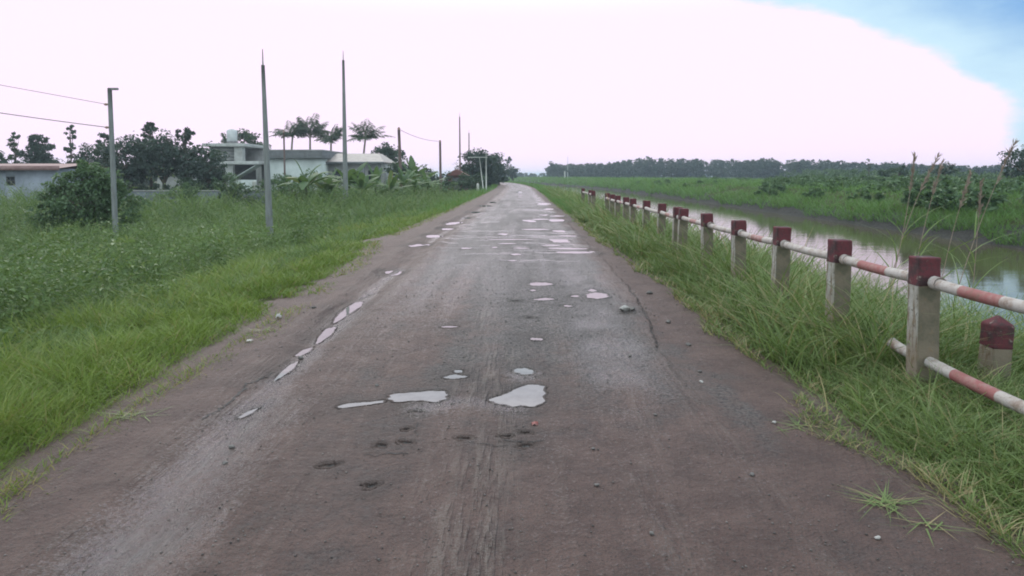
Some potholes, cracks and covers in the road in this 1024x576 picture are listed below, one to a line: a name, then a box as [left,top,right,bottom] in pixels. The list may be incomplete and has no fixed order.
pothole [315,326,337,345]
pothole [332,301,364,325]
pothole [583,292,612,300]
pothole [335,399,387,410]
pothole [273,361,299,382]
pothole [486,383,548,408]
pothole [313,461,344,469]
pothole [511,367,537,375]
pothole [294,346,315,357]
pothole [234,407,261,420]
crack [614,282,659,348]
pothole [513,442,538,450]
